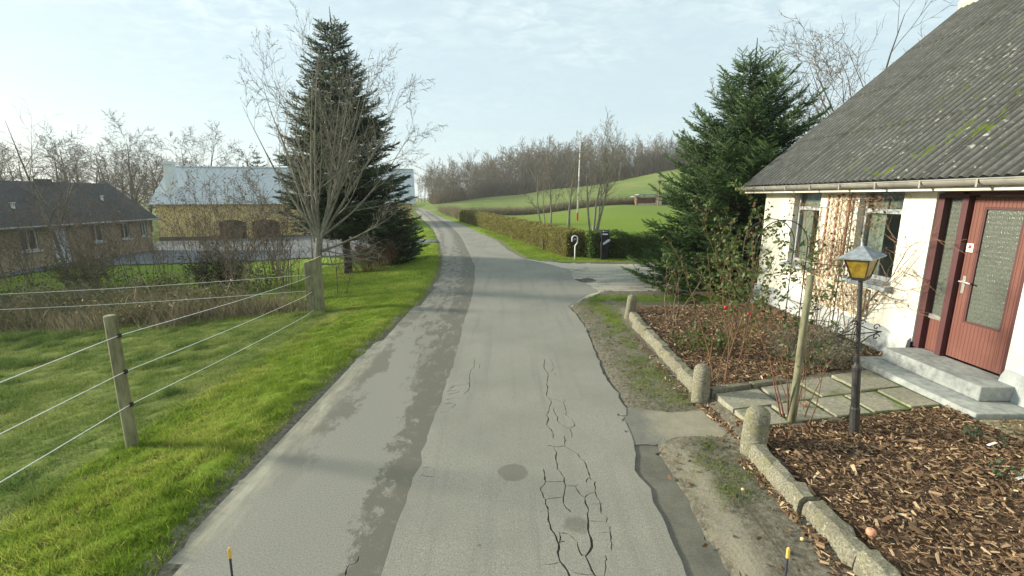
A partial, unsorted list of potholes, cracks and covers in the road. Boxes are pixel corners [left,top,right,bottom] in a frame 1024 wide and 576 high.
crack [540,437,612,576]
